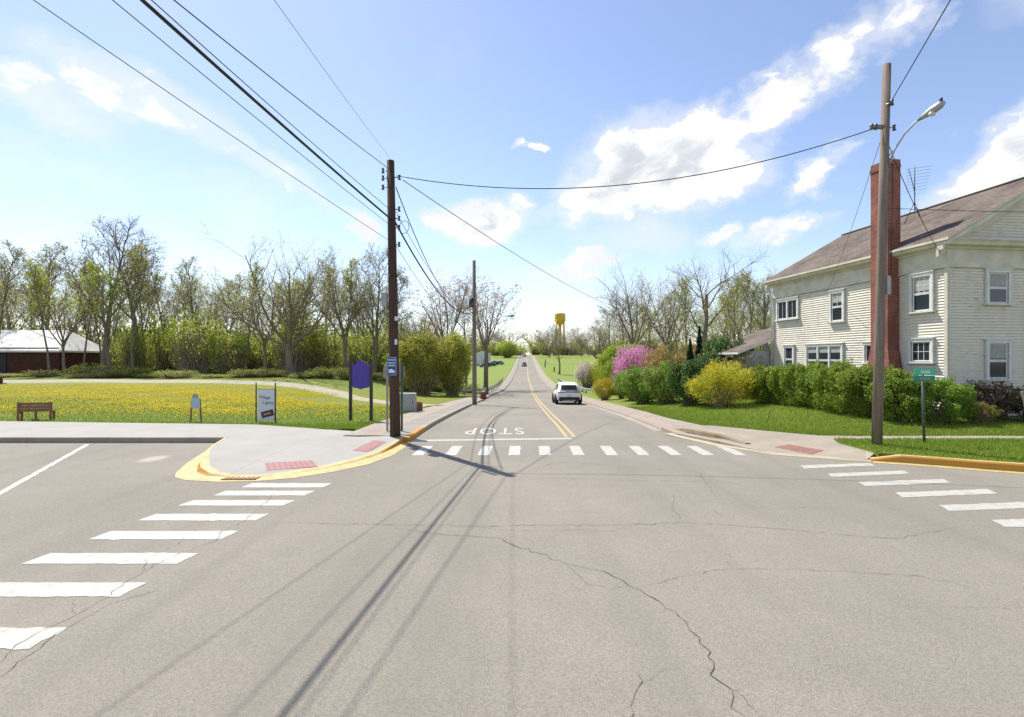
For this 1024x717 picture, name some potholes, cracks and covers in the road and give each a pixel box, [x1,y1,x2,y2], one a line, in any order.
crack [296,462,943,717]
